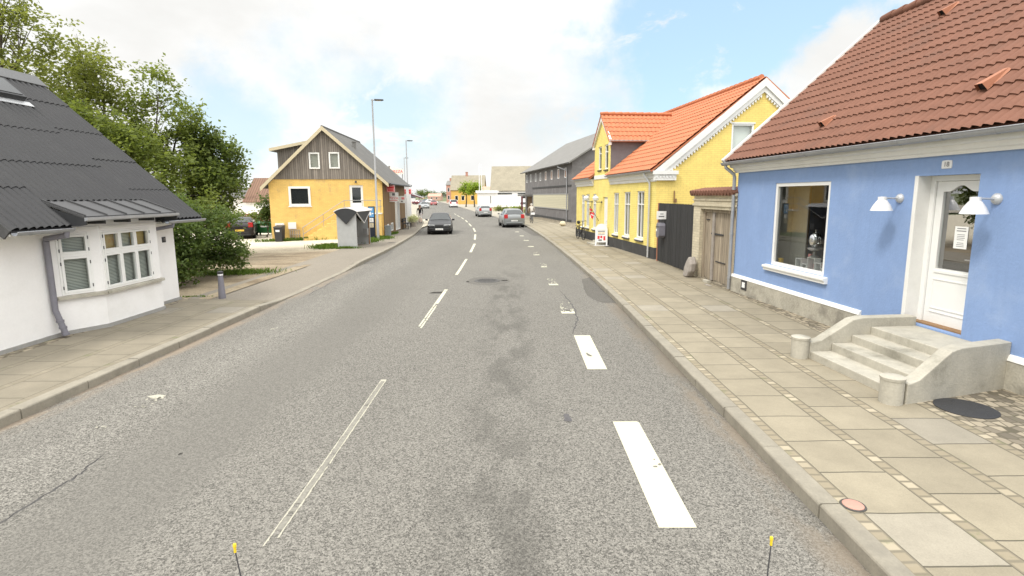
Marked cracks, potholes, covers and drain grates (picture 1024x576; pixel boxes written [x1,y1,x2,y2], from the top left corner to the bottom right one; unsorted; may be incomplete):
crack [560,291,579,333]
manhole cover [933,398,1001,419]
crack [0,456,101,523]
